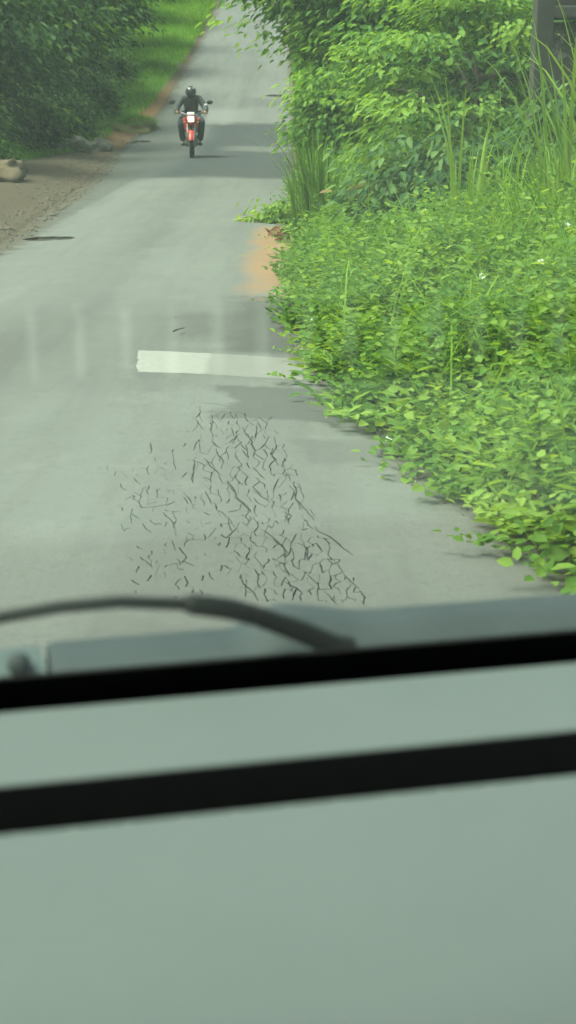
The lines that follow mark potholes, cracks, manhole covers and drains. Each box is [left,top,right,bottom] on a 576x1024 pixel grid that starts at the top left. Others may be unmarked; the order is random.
crack [107,403,369,608]
